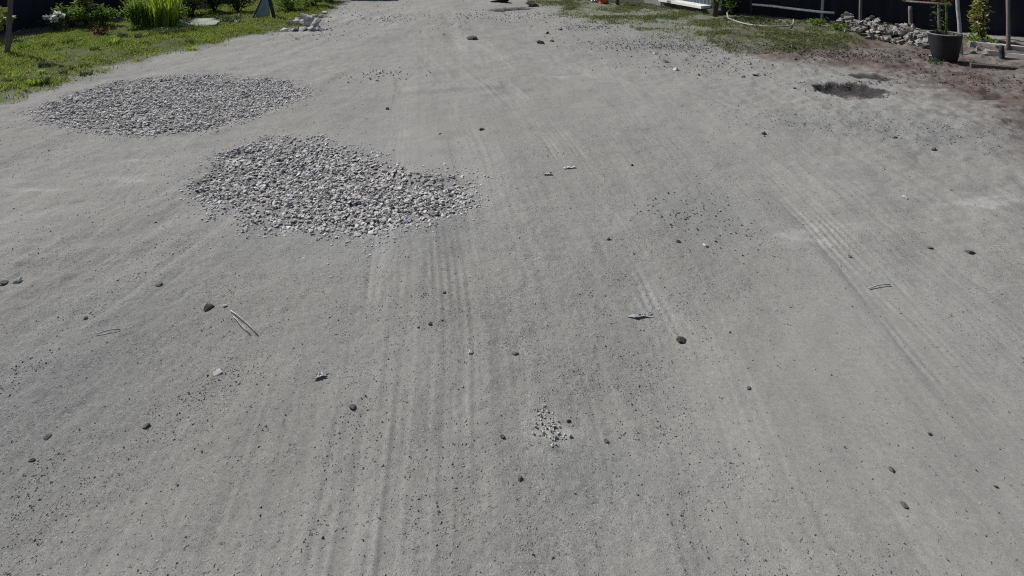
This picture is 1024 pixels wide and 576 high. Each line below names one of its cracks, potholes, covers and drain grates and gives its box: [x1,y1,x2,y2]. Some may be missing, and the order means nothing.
pothole [848,73,898,82]
pothole [811,82,891,102]
